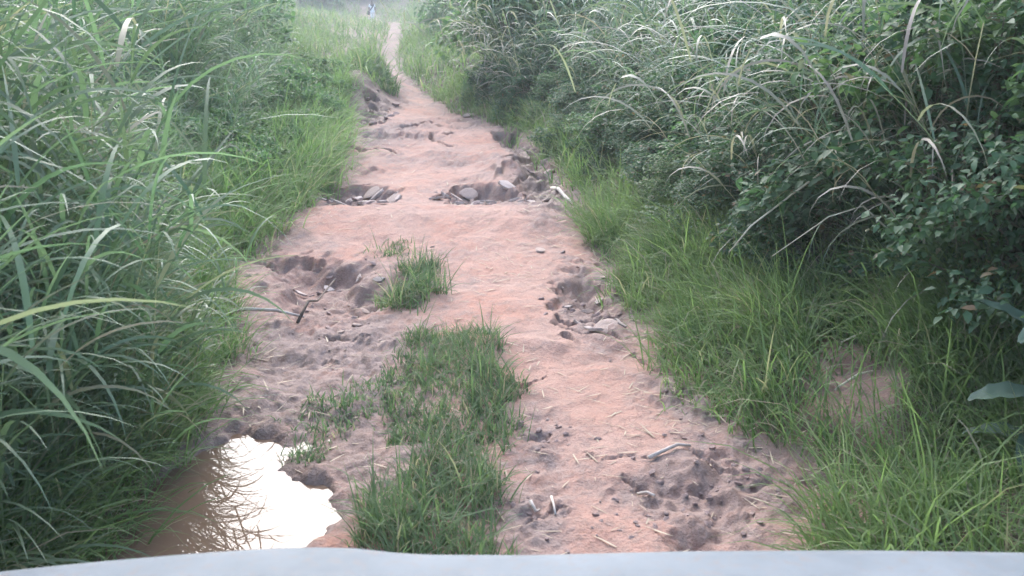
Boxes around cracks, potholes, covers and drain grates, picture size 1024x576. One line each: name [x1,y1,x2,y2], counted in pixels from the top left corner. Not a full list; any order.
pothole [442,180,524,206]
pothole [237,249,431,338]
pothole [305,183,404,209]
pothole [485,129,577,212]
pothole [543,258,629,340]
pothole [53,419,358,558]
